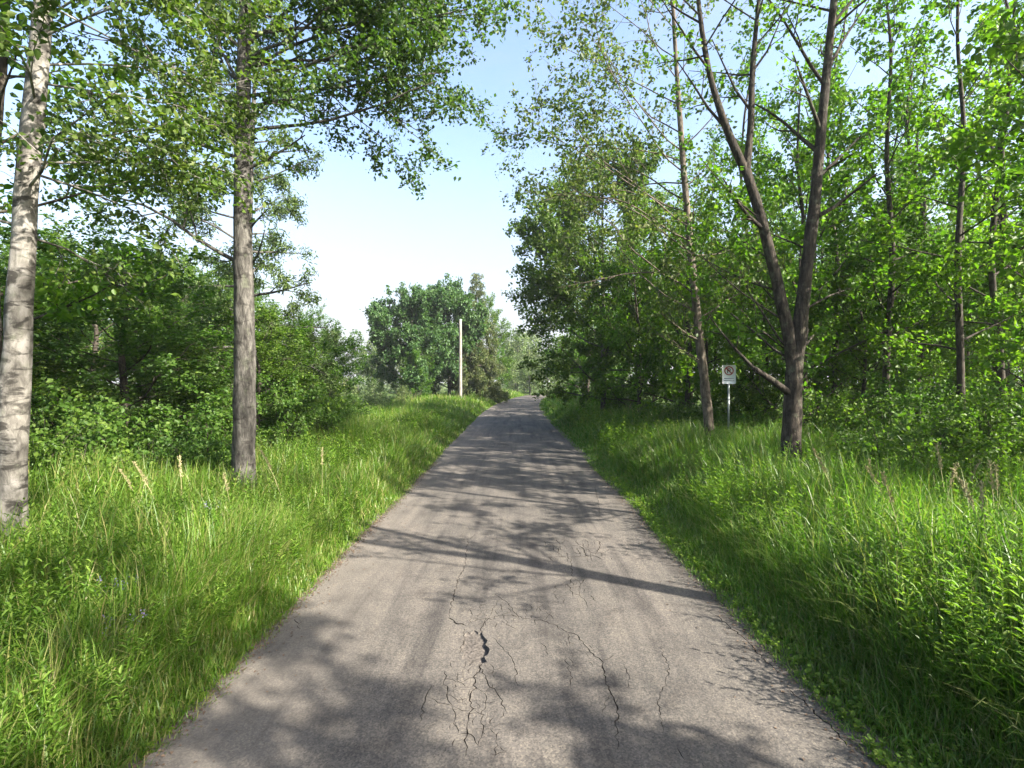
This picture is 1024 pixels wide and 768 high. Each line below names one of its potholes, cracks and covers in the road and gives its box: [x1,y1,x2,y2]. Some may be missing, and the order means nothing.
crack [420,536,630,758]
crack [657,651,670,731]
